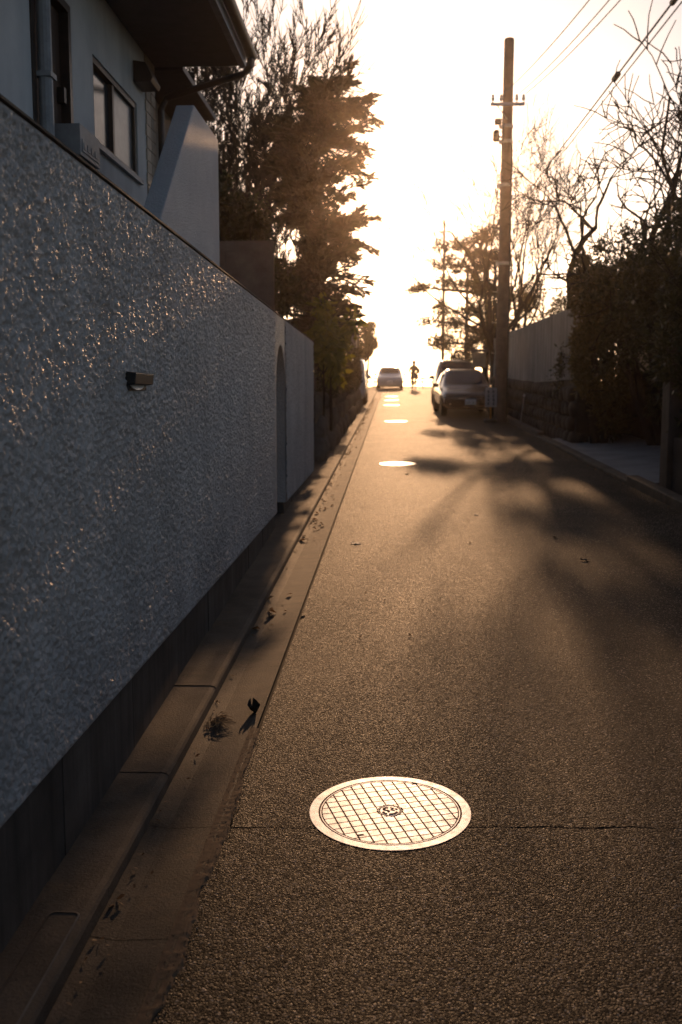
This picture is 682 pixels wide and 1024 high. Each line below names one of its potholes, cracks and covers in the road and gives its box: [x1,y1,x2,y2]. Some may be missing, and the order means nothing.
manhole cover [310,777,471,851]
